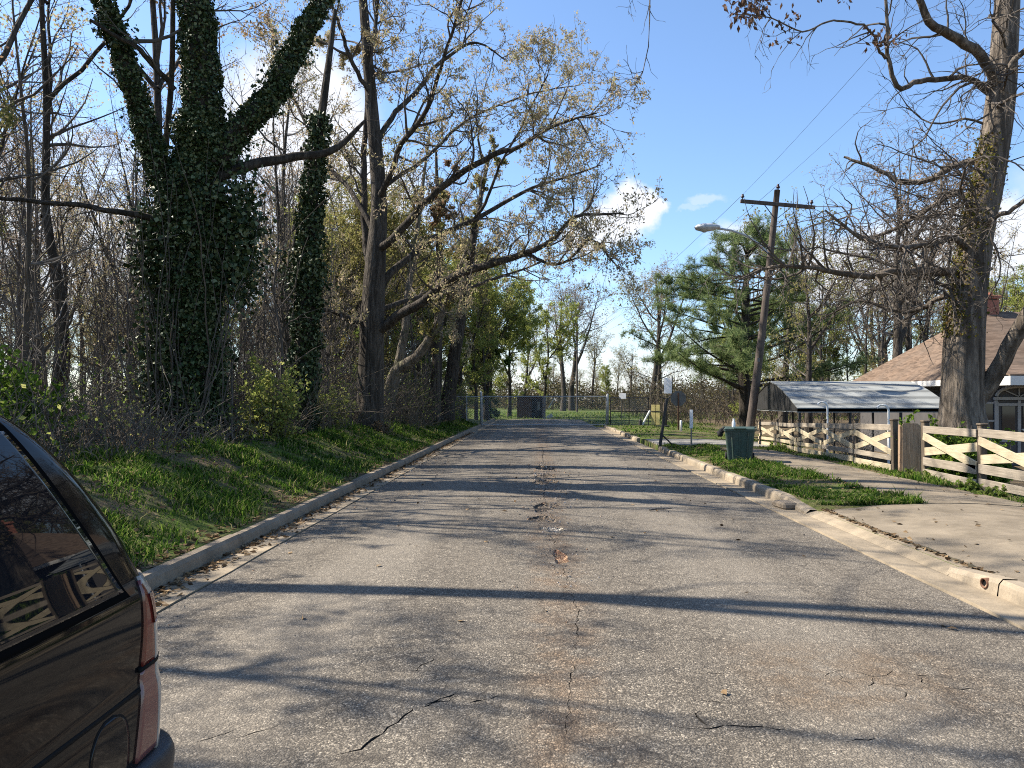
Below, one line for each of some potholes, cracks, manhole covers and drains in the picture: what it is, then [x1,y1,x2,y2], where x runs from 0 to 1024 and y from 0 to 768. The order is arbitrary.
pothole [552,550,569,564]
pothole [533,503,561,513]
crack [674,700,794,733]
crack [335,694,497,756]
crack [825,670,972,698]
